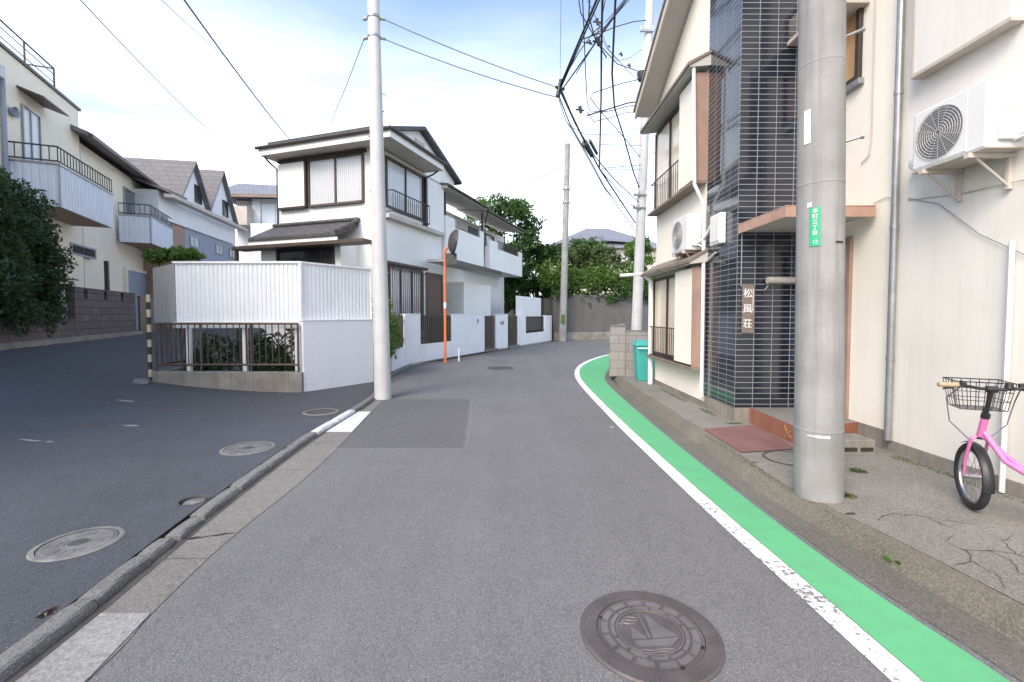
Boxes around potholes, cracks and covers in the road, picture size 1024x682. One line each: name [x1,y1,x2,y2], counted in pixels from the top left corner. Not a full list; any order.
manhole cover [219,441,276,456]
utility cover [178,494,210,507]
pothole [35,605,61,620]
crack [878,513,1024,587]
utility cover [762,450,794,466]
manhole cover [26,526,126,562]
manhole cover [580,591,725,682]
manhole cover [302,408,339,416]
